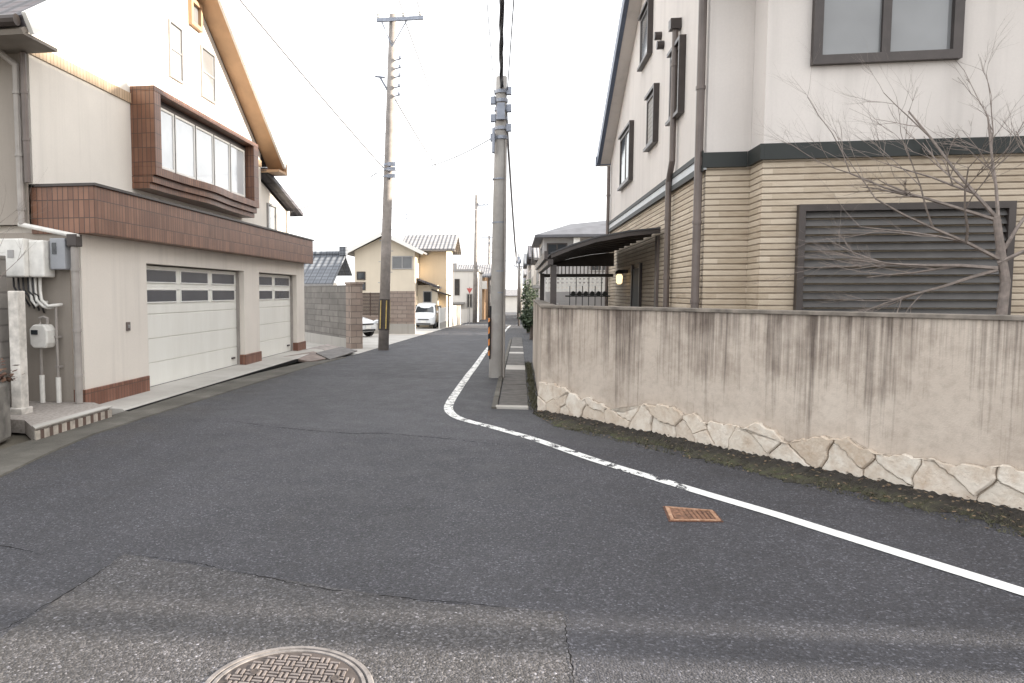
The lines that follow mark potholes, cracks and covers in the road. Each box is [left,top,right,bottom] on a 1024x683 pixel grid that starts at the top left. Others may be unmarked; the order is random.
manhole cover [204,646,374,683]
crack [242,422,522,447]
crack [0,545,133,632]
